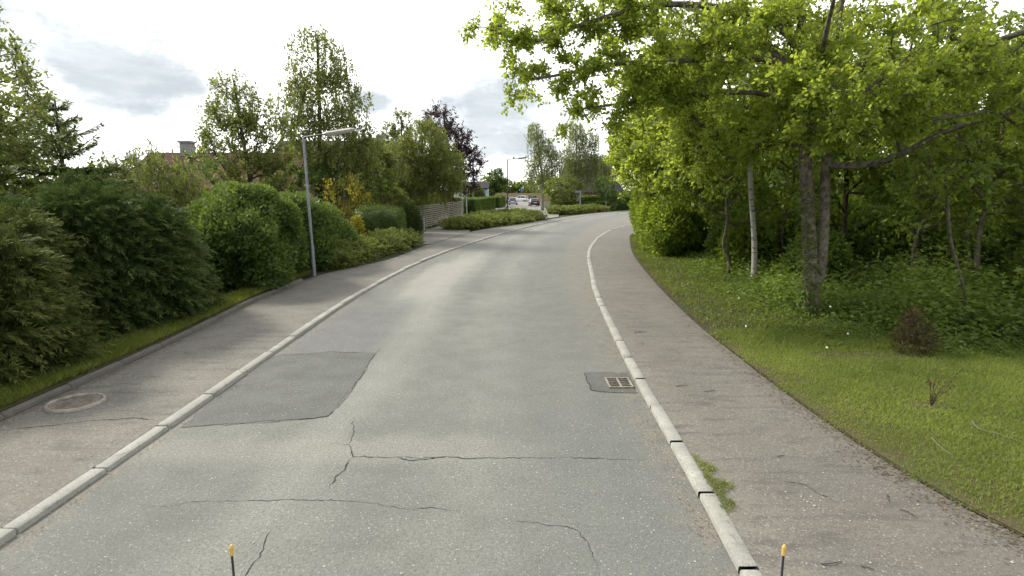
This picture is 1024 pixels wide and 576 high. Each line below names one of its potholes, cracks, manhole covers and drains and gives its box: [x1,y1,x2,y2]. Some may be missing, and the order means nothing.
drain grate [605,377,634,388]
crack [168,423,650,511]
crack [512,520,599,571]
manhole cover [43,393,107,413]
